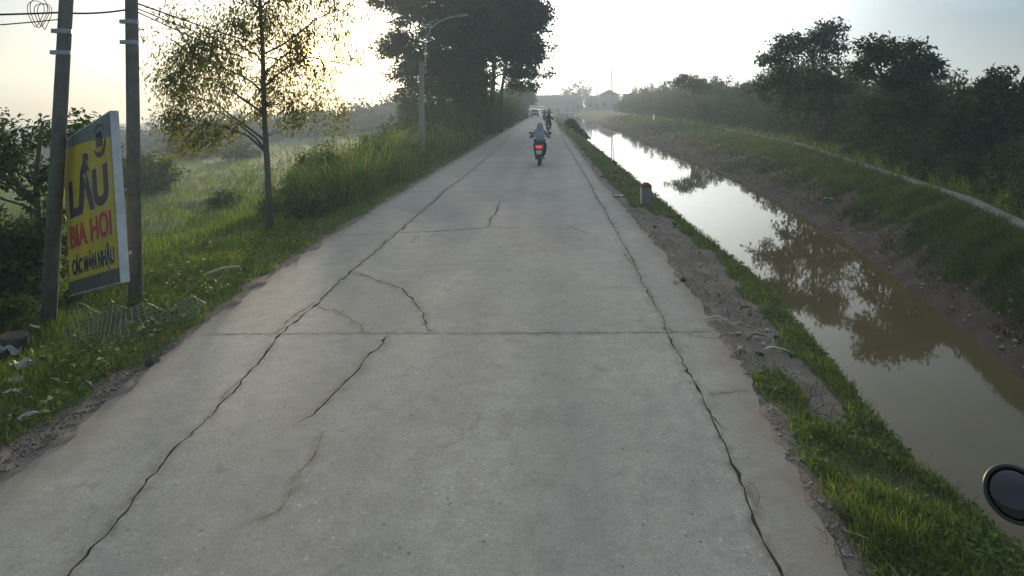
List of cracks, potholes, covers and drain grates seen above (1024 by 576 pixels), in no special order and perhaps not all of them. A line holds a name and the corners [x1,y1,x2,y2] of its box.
crack [67,135,784,576]
